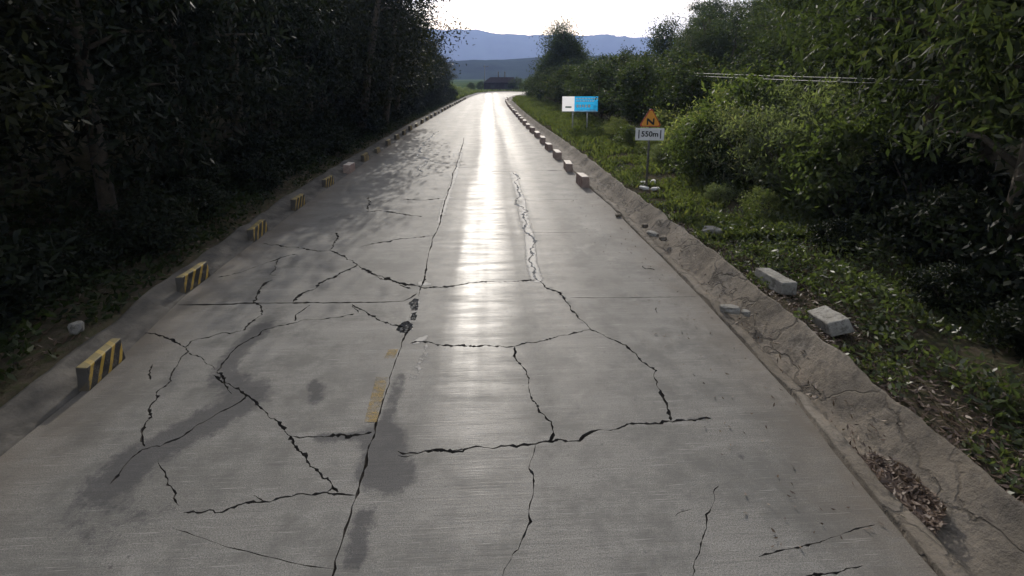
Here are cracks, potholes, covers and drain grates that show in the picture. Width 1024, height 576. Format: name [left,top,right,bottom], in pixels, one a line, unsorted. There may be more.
pothole [396,321,413,335]
crack [676,486,718,574]
crack [110,173,711,574]
crack [759,525,873,557]
crack [806,566,861,576]
